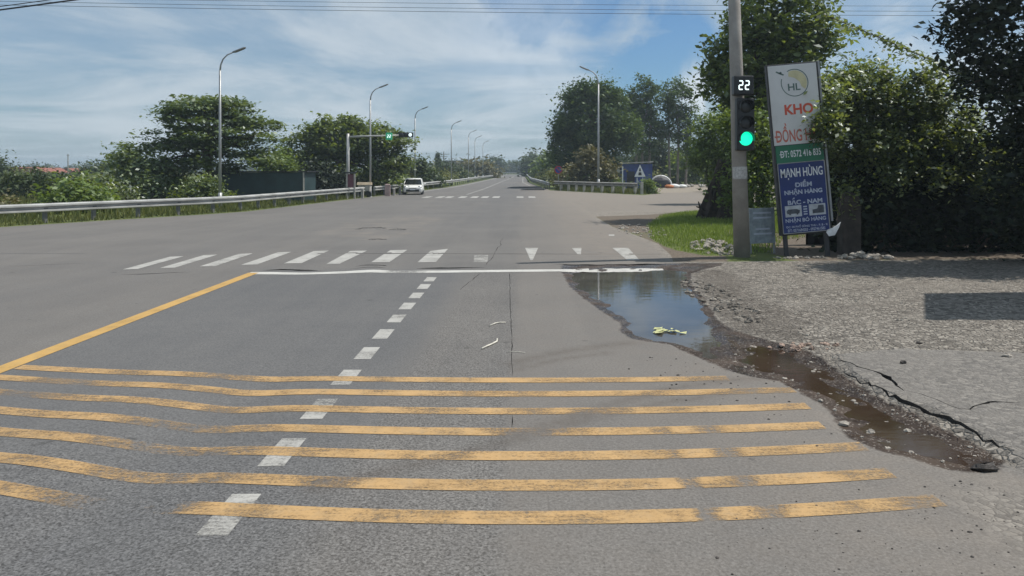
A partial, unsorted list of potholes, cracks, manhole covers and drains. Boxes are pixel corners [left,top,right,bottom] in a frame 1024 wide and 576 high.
crack [839,360,1017,450]
